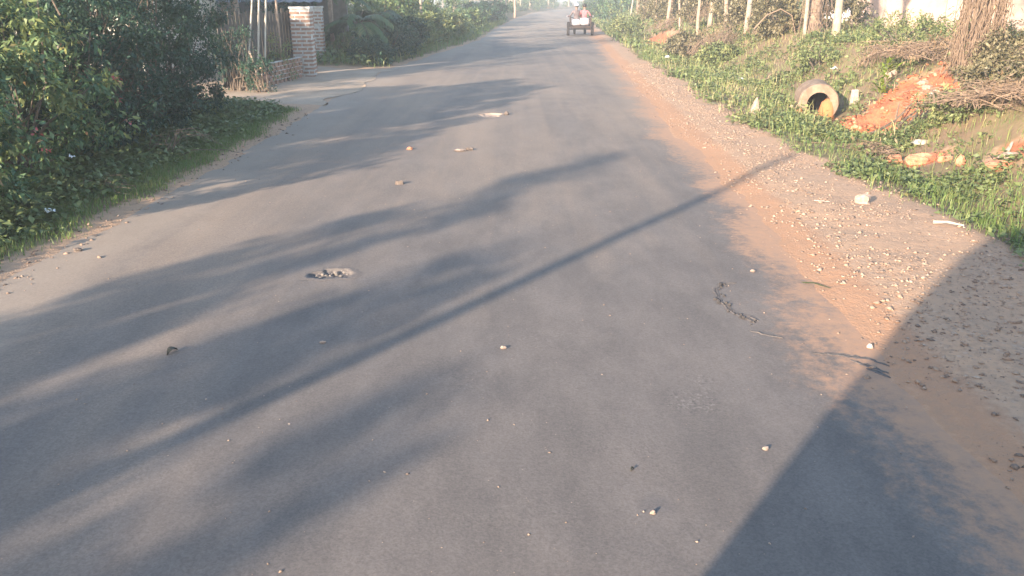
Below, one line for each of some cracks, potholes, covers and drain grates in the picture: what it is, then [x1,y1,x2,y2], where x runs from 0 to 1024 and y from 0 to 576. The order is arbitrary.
pothole [298,266,363,282]
crack [712,282,783,338]
